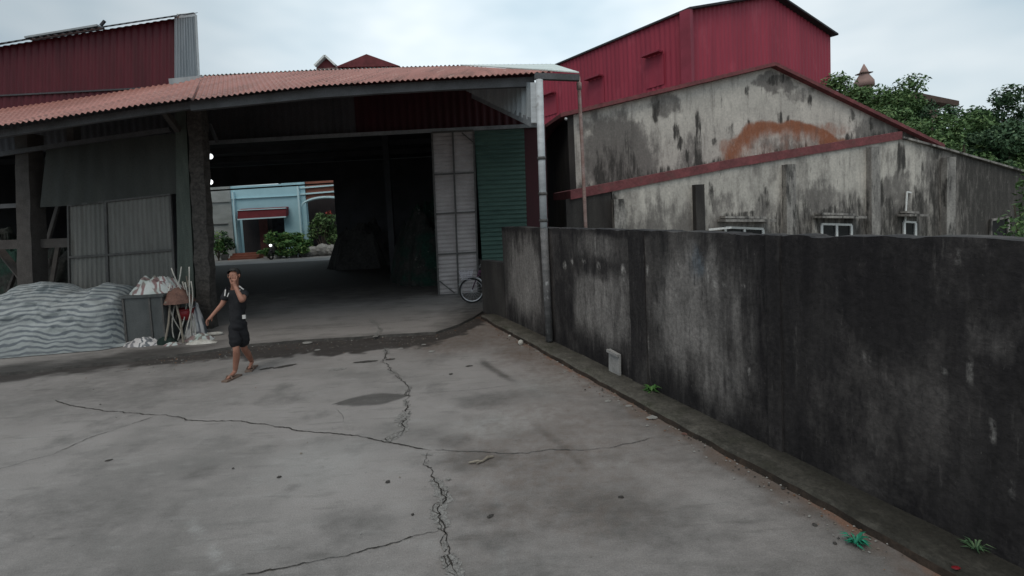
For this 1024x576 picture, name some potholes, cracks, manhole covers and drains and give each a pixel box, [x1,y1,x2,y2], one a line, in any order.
crack [4,318,648,576]
